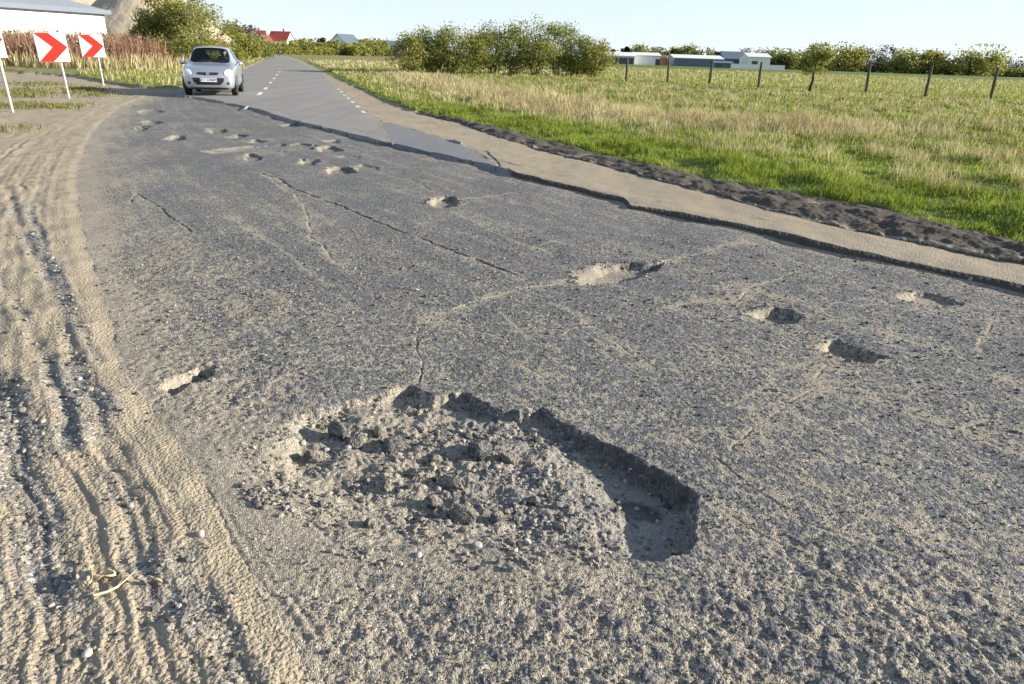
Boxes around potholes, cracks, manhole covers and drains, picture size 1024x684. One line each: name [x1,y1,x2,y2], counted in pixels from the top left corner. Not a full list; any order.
pothole [428,196,461,209]
pothole [157,365,217,397]
pothole [571,261,664,286]
pothole [322,166,357,175]
pothole [812,338,891,364]
pothole [208,384,701,581]
pothole [199,143,317,154]
pothole [297,158,321,166]
pothole [894,291,960,308]
pothole [315,145,345,153]
crack [128,192,193,232]
pothole [239,153,263,161]
